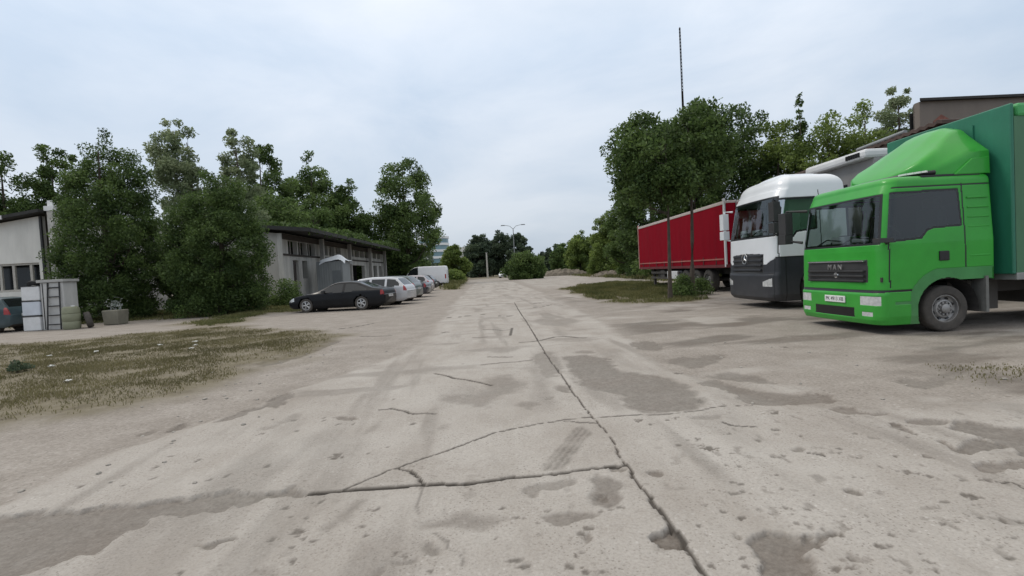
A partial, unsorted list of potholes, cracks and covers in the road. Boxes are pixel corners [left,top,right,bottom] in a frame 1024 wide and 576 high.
pothole [735,530,838,576]
crack [308,412,687,514]
crack [436,328,585,386]
pothole [650,530,681,551]
